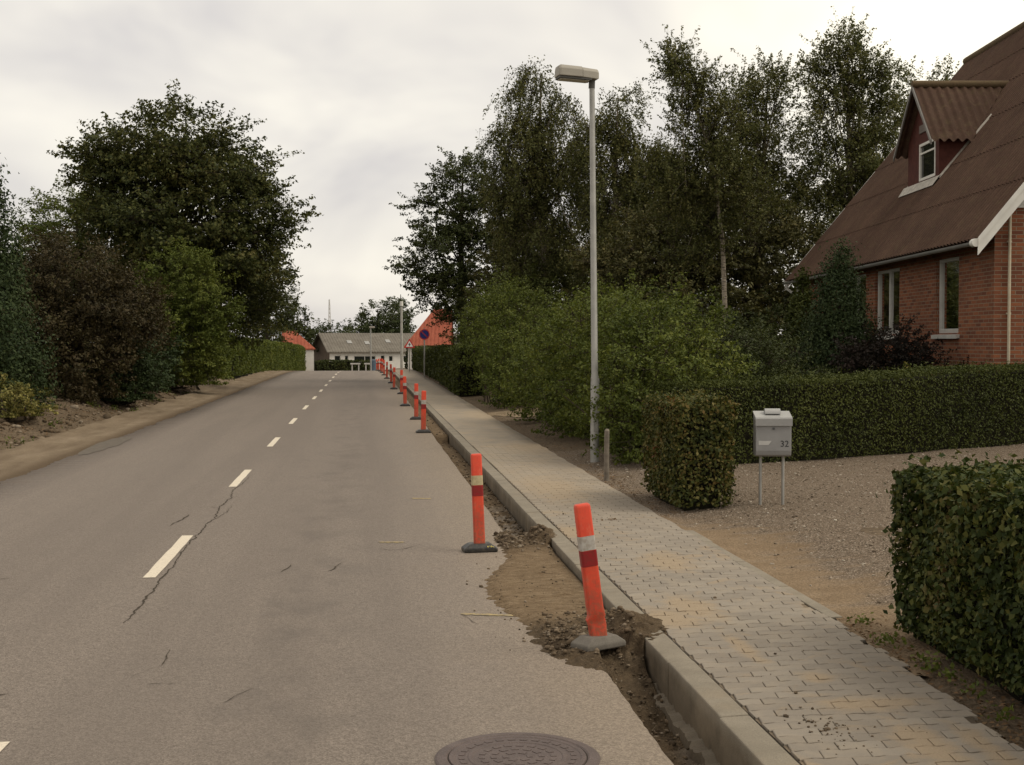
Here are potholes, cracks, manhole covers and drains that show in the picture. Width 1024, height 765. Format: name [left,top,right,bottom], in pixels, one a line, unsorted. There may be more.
manhole cover [435,732,601,765]
crack [123,477,249,623]
